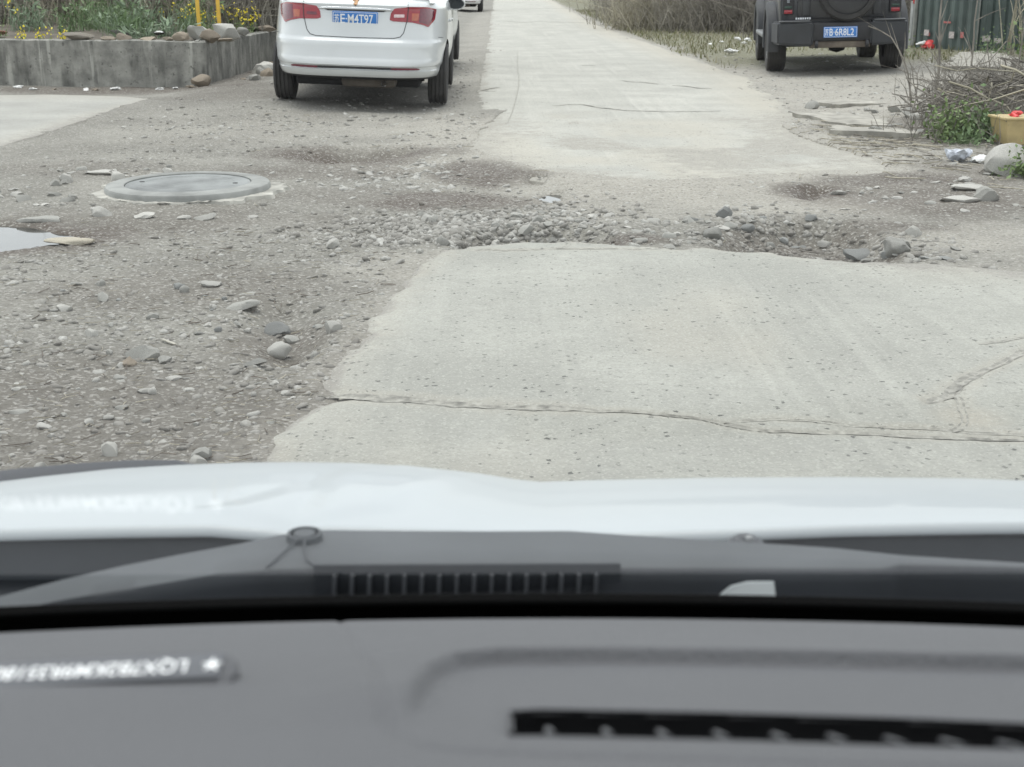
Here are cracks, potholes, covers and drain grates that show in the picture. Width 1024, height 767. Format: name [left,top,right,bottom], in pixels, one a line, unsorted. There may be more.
pothole [707,216,902,264]
pothole [790,183,838,201]
pothole [538,190,568,202]
pothole [449,225,629,250]
crack [318,337,1024,441]
manhole cover [89,171,291,205]
pothole [0,219,93,251]
